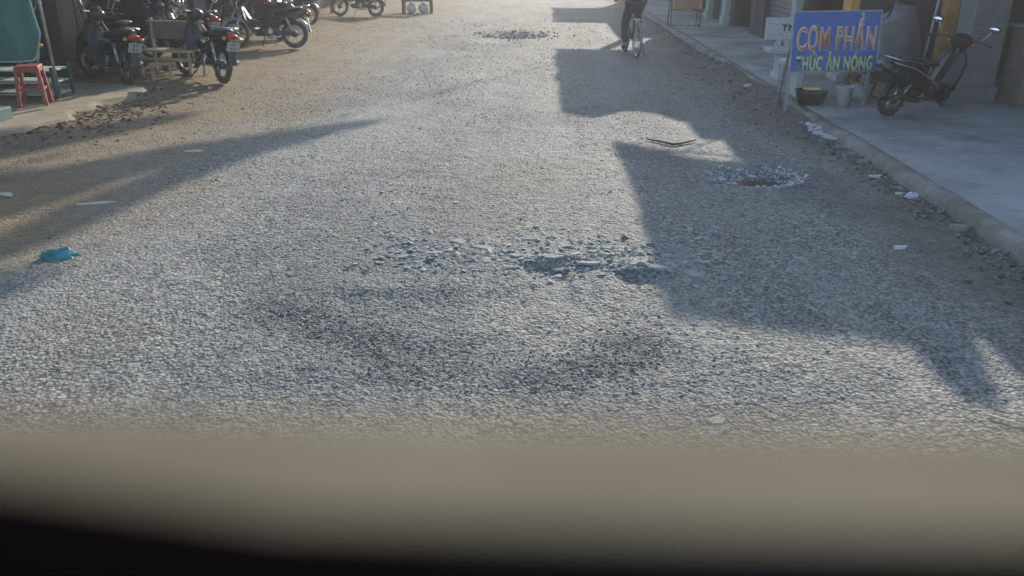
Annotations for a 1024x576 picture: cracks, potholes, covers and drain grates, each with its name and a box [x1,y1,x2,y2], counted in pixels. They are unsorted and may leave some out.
pothole [248,253,694,390]
pothole [709,167,799,187]
